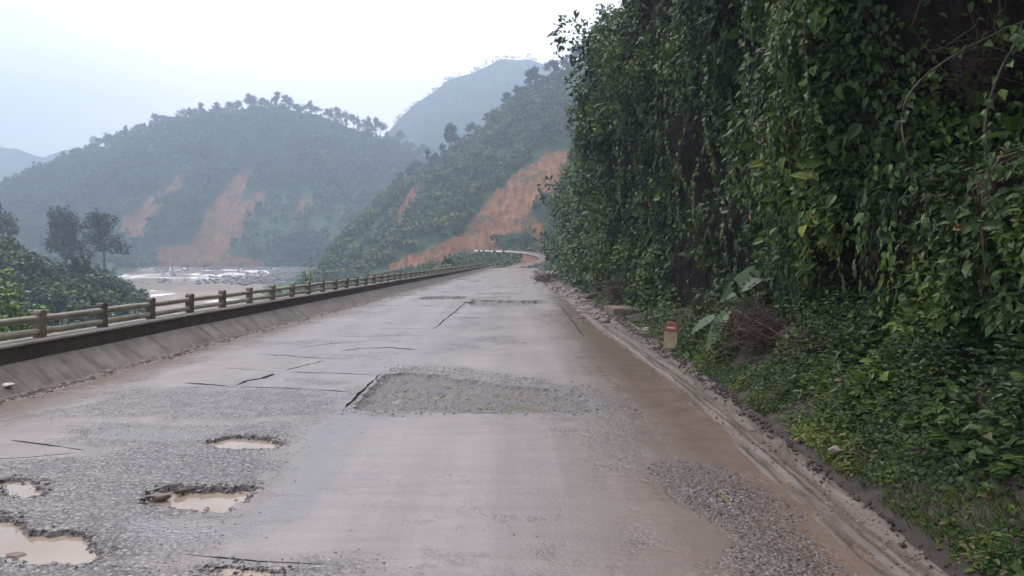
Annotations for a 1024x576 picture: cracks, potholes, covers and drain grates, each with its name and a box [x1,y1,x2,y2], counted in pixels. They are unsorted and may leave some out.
crack [0,440,85,459]
pothole [353,372,597,414]
crack [189,341,416,392]
pothole [0,477,46,498]
pothole [198,565,291,576]
pothole [206,435,288,449]
pothole [0,515,106,565]
pothole [139,484,256,513]
crack [185,554,316,564]
